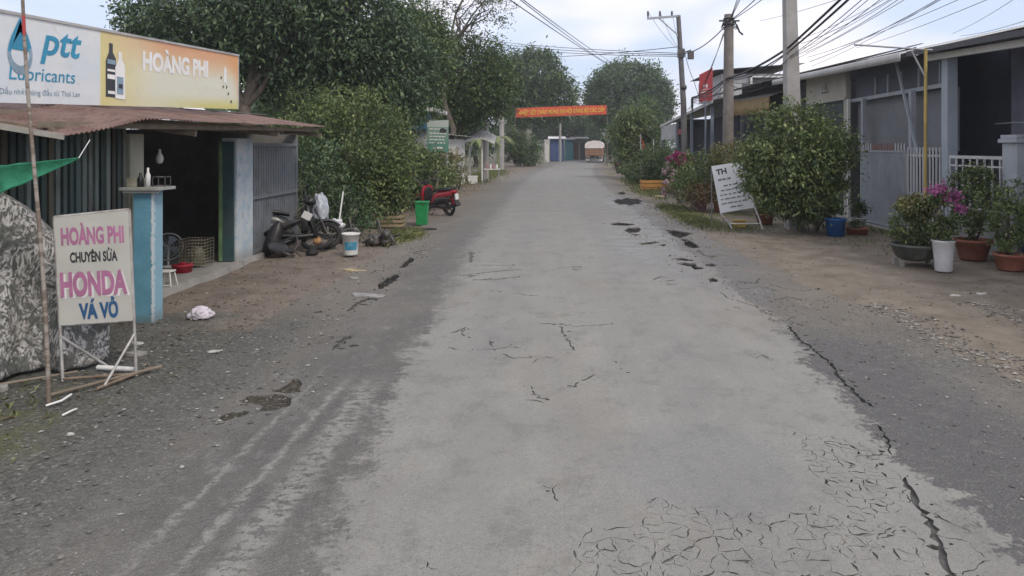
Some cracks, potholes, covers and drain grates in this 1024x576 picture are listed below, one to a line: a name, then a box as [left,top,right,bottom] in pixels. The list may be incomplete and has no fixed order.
pothole [219,411,250,421]
pothole [240,394,292,411]
pothole [377,274,400,289]
pothole [613,198,642,206]
pothole [273,379,302,393]
crack [697,250,873,407]
crack [569,424,985,576]
crack [448,323,613,363]
pothole [666,230,693,238]
